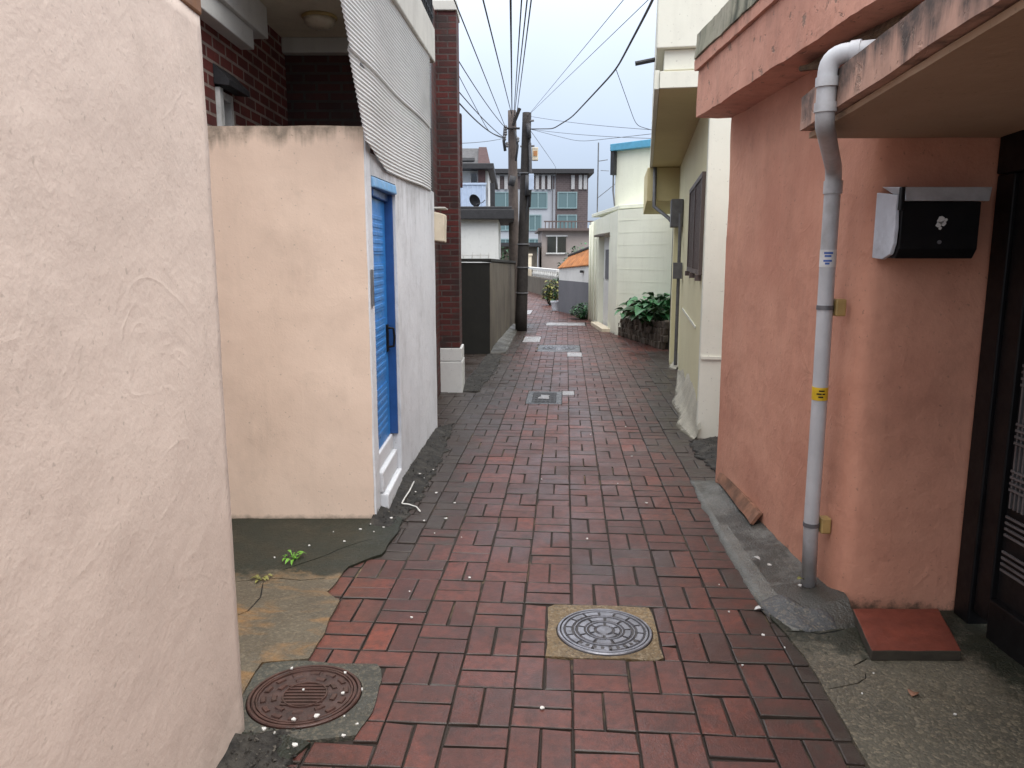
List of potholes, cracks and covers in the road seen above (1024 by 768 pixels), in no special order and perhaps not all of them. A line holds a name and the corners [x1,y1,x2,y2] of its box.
manhole cover [526,391,562,405]
manhole cover [545,605,664,663]
manhole cover [242,661,382,745]
